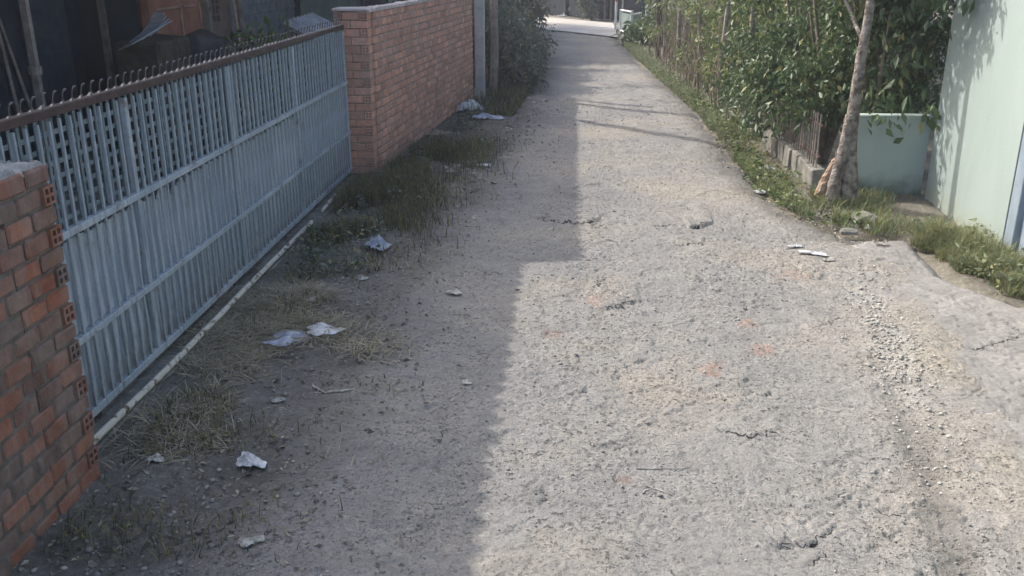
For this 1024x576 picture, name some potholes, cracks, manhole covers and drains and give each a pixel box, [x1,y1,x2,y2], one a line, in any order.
crack [778,527,833,566]
crack [959,320,1024,355]
crack [717,428,803,439]
crack [534,214,605,229]
